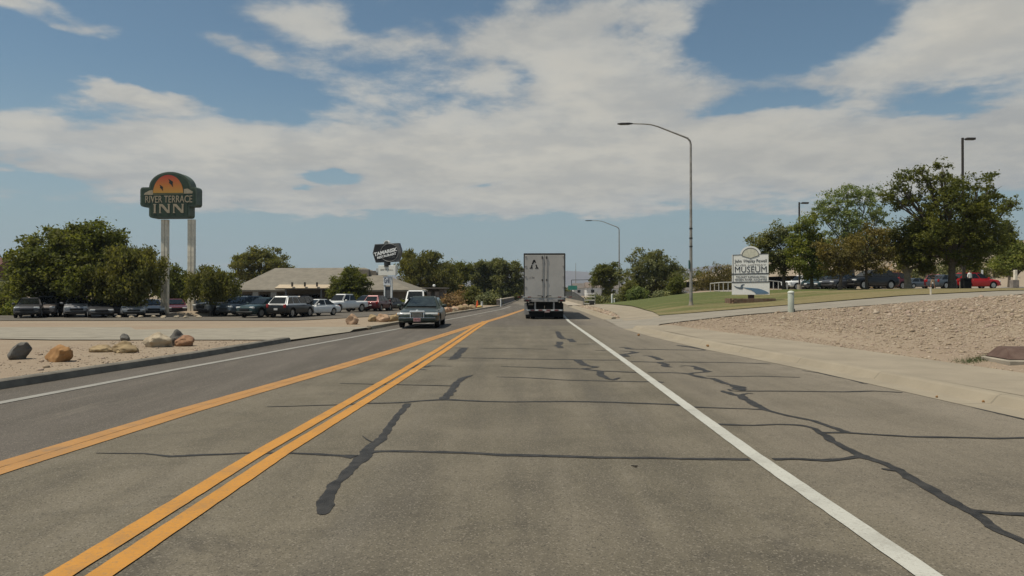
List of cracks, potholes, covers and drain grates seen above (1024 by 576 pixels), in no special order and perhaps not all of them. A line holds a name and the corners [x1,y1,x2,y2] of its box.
crack [517,347,1024,544]
